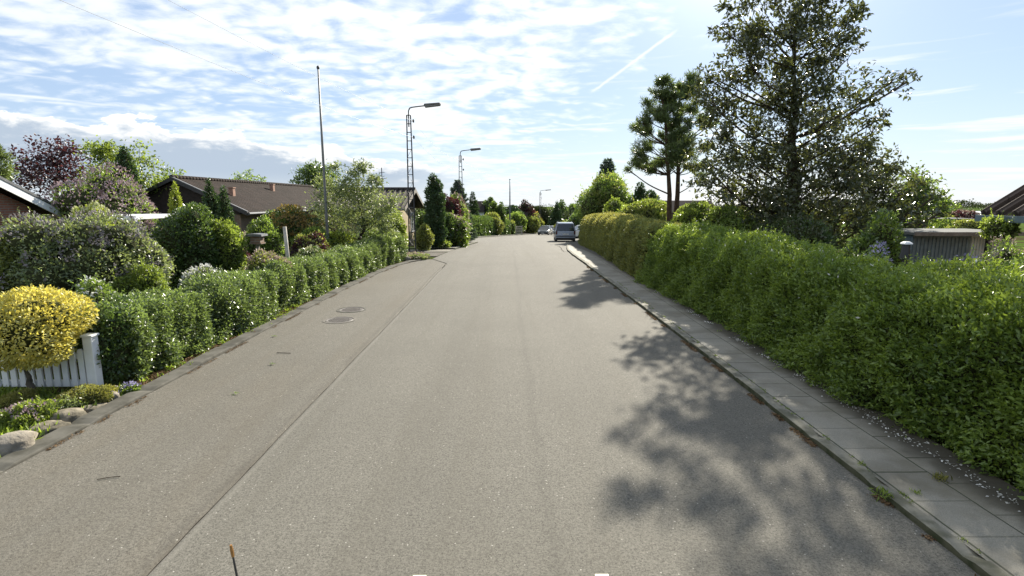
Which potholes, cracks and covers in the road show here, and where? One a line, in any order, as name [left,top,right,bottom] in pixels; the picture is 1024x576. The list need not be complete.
manhole cover [322,316,356,324]
